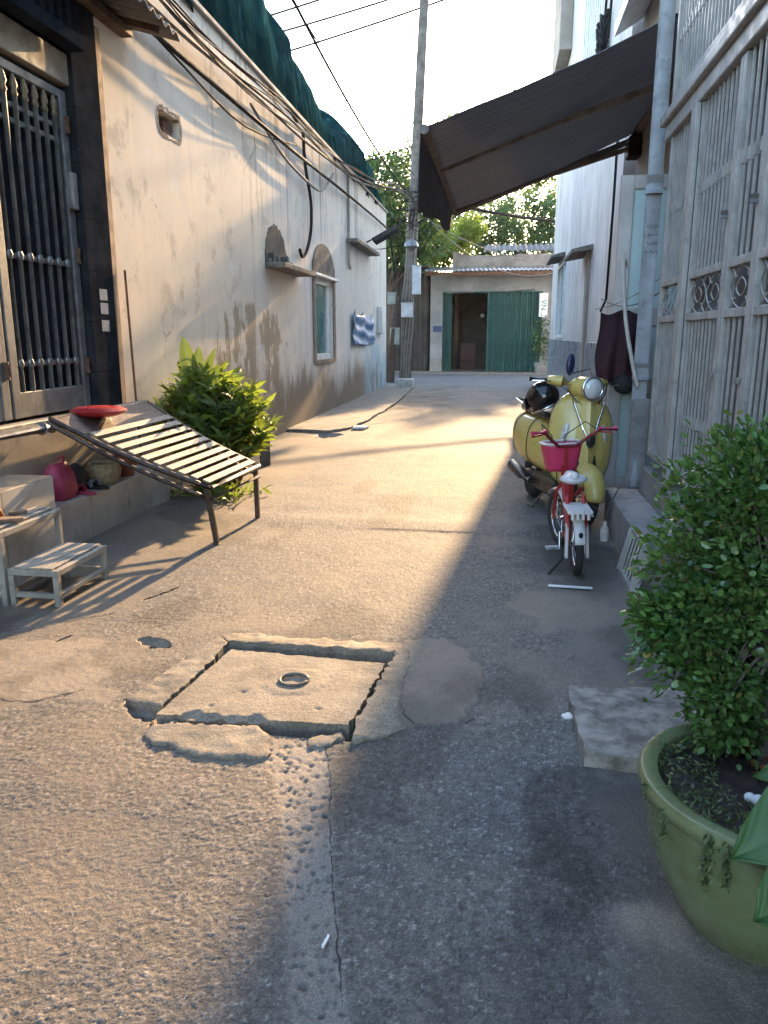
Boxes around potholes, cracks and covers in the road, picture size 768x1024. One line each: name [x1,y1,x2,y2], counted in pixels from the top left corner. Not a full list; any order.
pothole [138,636,171,648]
crack [131,587,190,620]
manhole cover [127,629,411,761]
pothole [122,699,154,722]
crack [325,747,343,1004]
